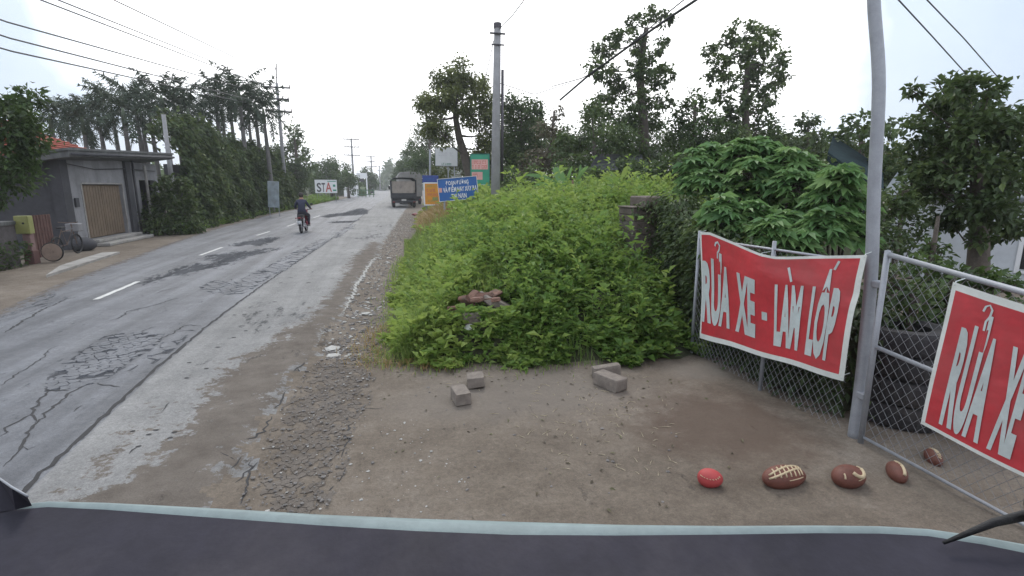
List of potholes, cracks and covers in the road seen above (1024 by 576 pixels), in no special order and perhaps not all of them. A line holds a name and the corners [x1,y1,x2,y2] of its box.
crack [196,224,356,295]
crack [0,288,197,464]
